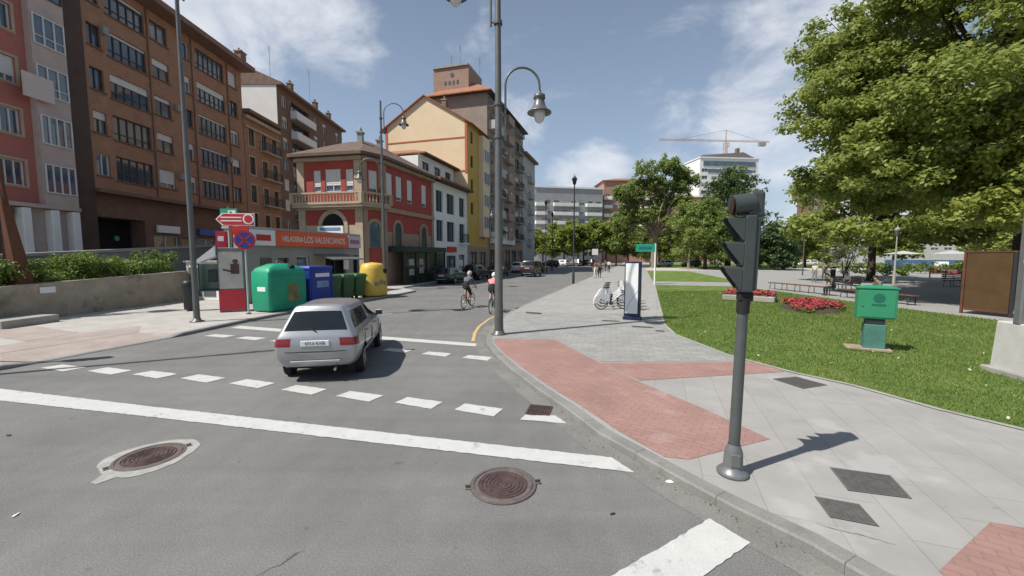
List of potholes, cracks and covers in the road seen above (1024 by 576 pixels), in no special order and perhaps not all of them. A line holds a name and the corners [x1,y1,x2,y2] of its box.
utility cover [773,376,827,388]
drain grate [525,404,553,416]
utility cover [815,496,879,526]
manhole cover [91,439,200,484]
manhole cover [465,467,542,505]
utility cover [830,467,911,498]
